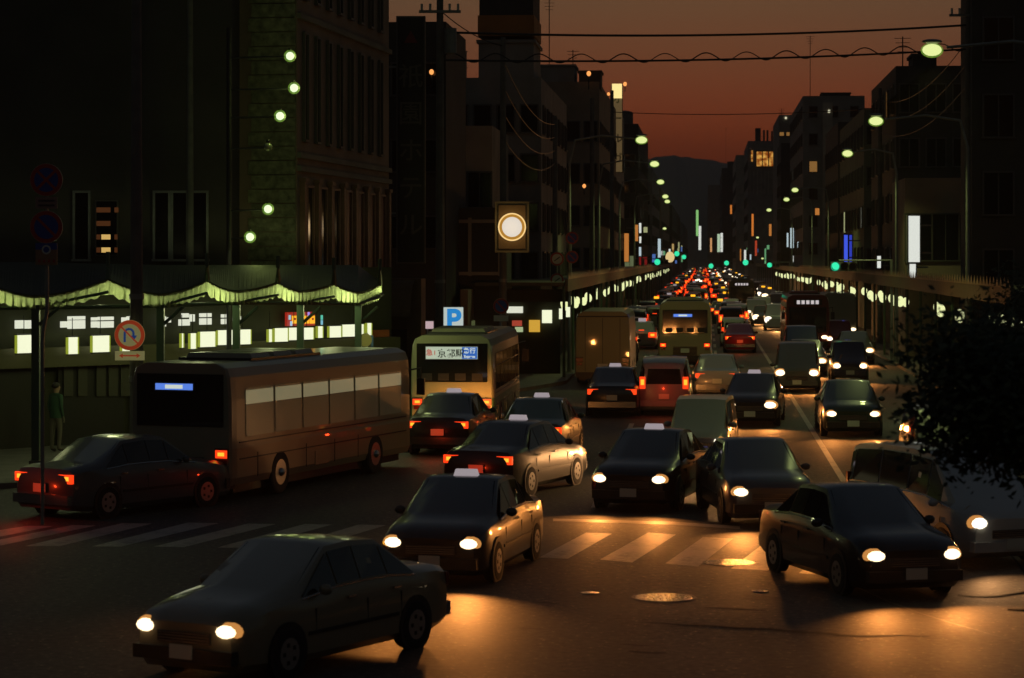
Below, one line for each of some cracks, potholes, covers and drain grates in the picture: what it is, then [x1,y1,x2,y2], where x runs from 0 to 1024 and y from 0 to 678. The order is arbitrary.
manhole cover [631,593,697,602]
